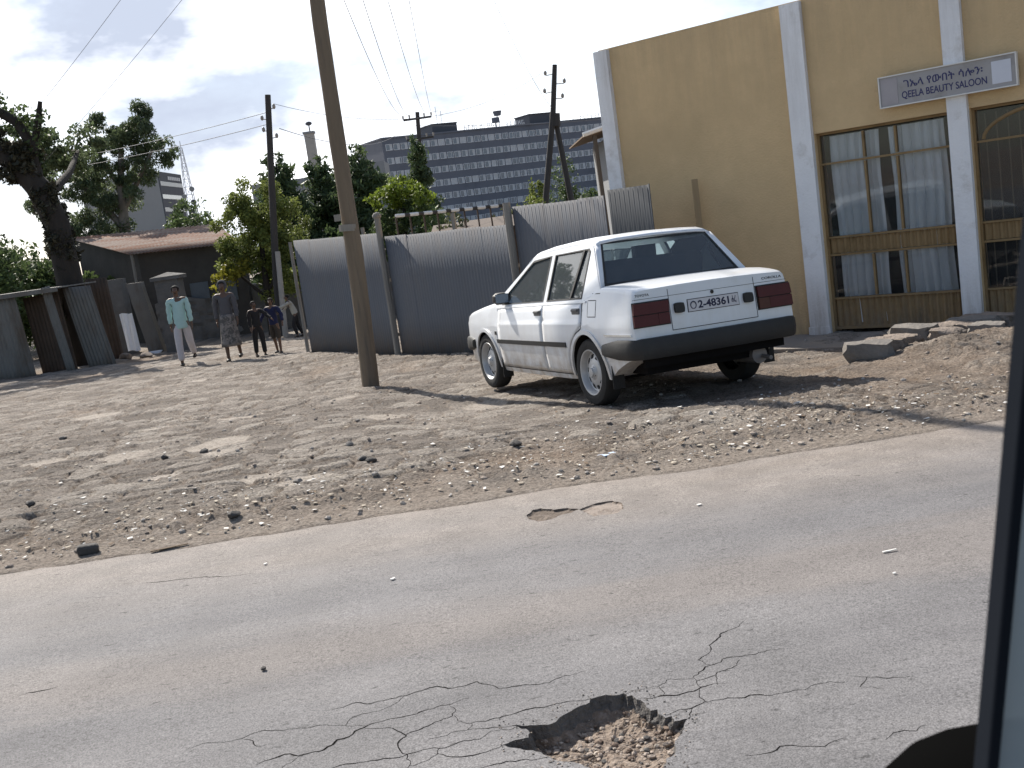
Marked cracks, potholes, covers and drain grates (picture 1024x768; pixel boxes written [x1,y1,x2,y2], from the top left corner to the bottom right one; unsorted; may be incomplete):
pothole [490,681,711,768]
crack [757,739,839,755]
pothole [579,501,623,516]
crack [192,671,584,768]
pothole [526,508,578,522]
crack [629,625,842,718]
